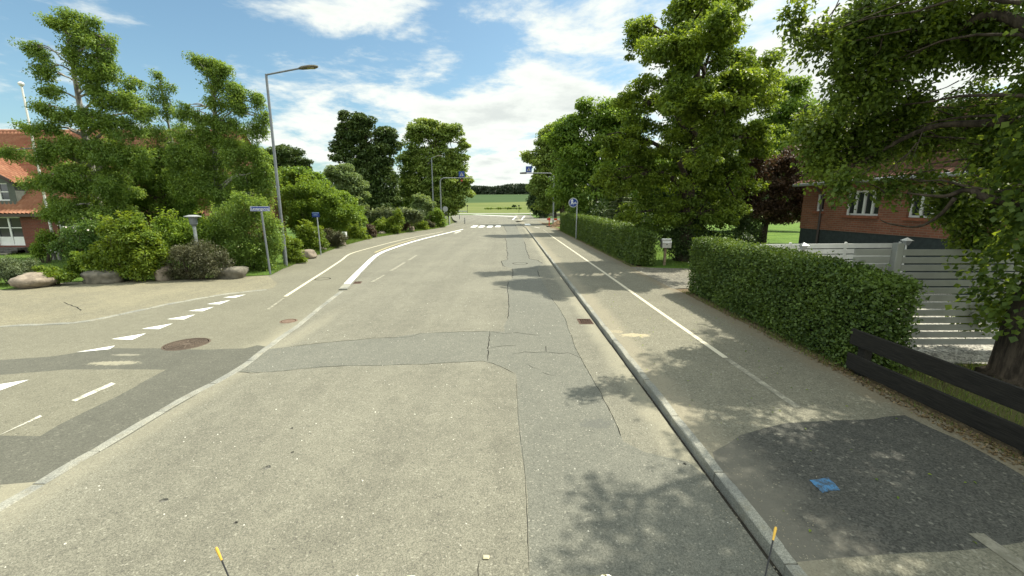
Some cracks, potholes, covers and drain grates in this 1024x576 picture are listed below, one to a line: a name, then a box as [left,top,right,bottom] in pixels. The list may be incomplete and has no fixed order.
crack [245,226,580,565]
manhole cover [161,338,211,351]
